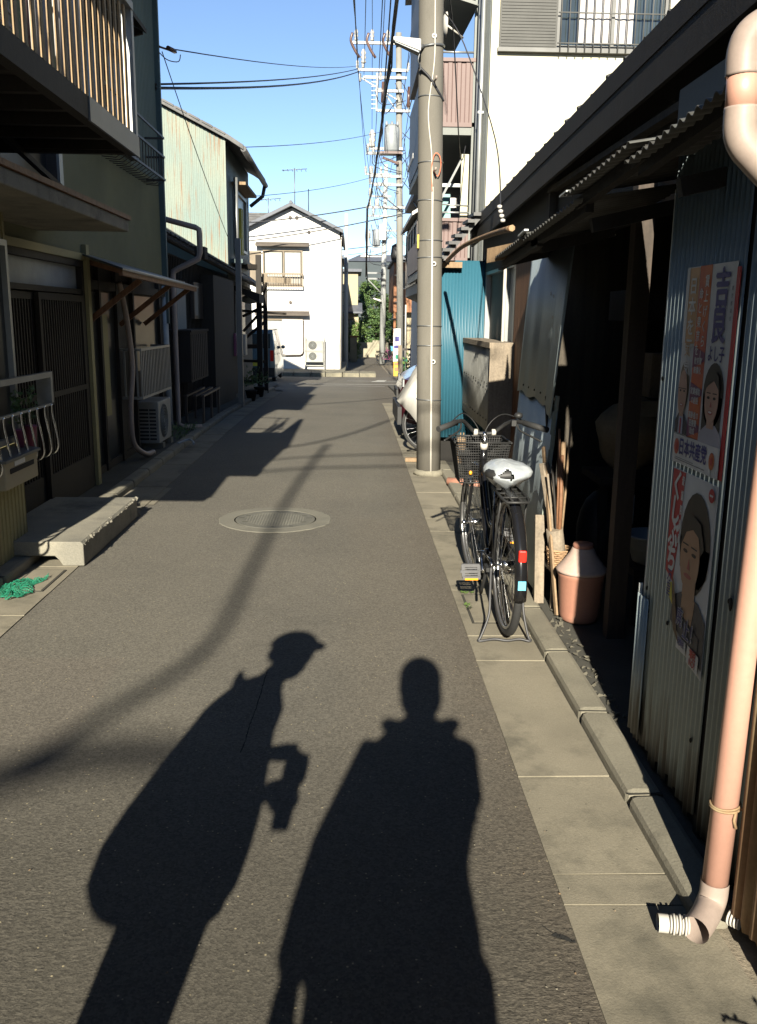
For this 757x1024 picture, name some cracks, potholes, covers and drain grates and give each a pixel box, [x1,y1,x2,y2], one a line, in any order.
manhole cover [219,507,331,533]
